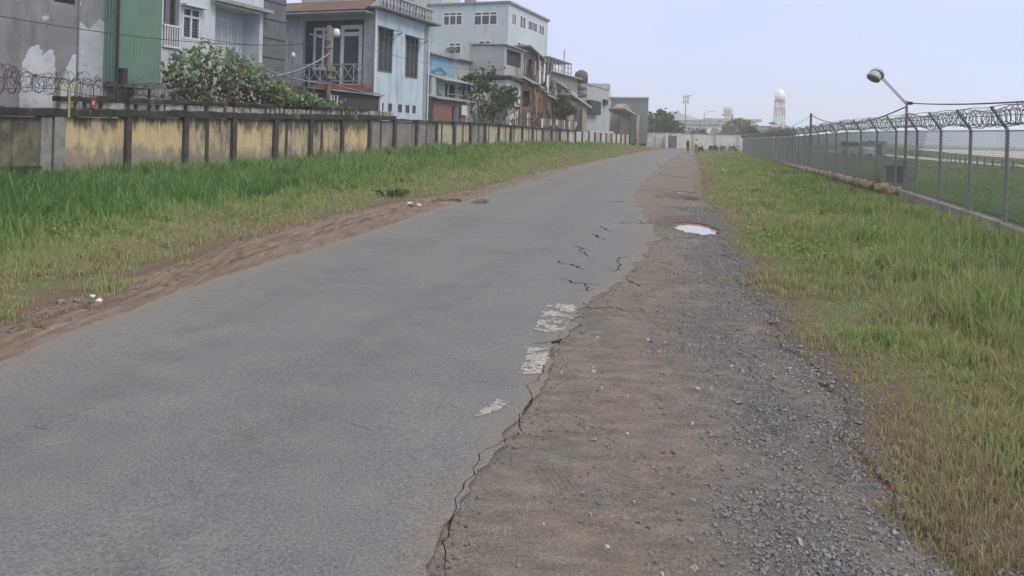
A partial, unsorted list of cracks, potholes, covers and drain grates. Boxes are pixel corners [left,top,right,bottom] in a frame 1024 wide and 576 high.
pothole [671,222,719,235]
crack [558,227,621,310]
crack [442,339,561,574]
